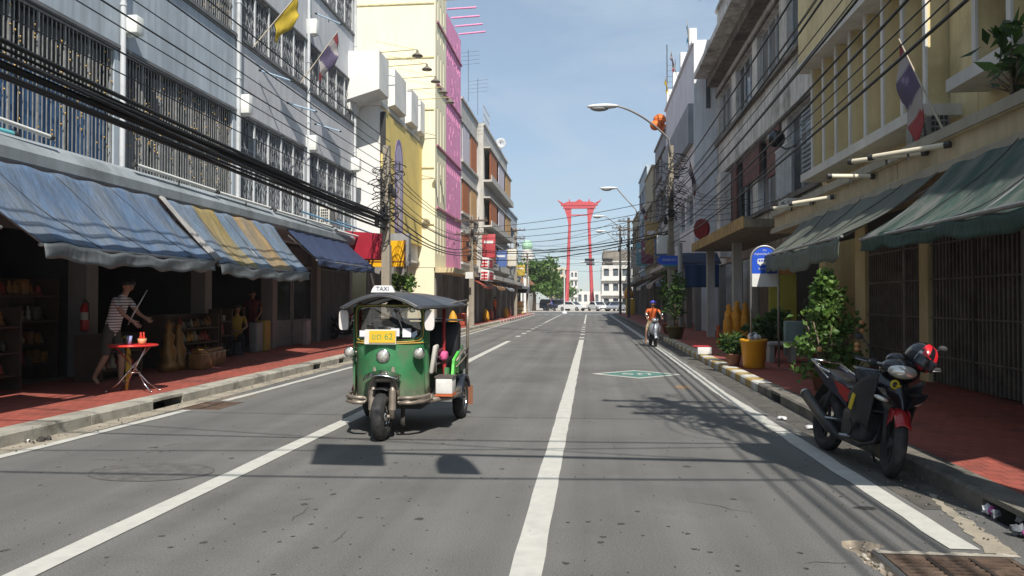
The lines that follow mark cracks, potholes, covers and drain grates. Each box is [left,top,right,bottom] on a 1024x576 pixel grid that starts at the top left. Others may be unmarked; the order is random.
drain grate [874,549,1024,576]
drain grate [180,402,244,410]
manhole cover [86,463,215,481]
pothole [842,540,898,576]
